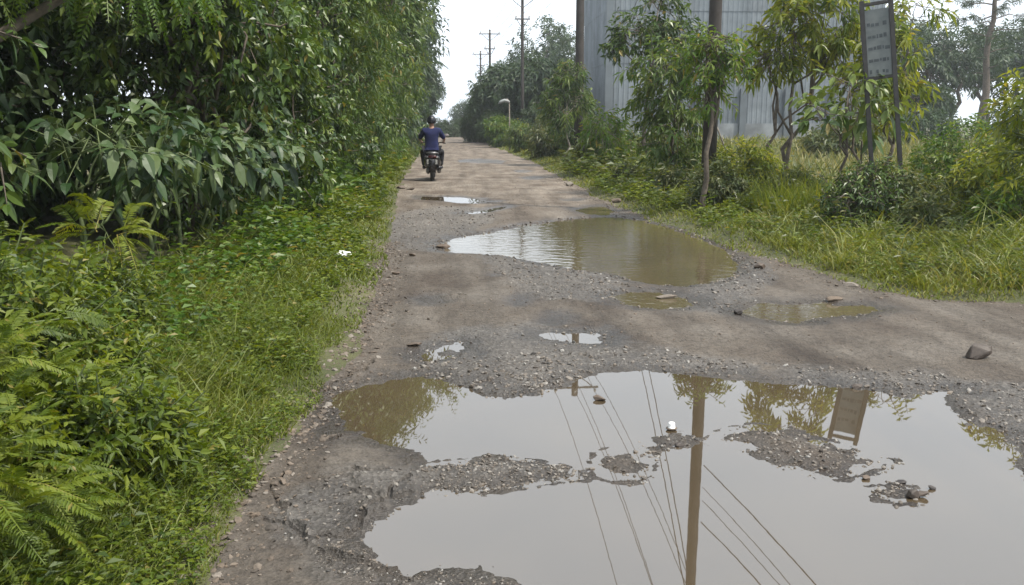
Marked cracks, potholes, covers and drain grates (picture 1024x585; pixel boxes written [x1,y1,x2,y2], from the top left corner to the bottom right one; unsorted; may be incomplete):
pothole [431,215,747,287]
pothole [524,328,614,346]
pothole [602,287,705,310]
pothole [724,299,893,324]
pothole [416,195,485,204]
pothole [406,338,479,363]
pothole [309,365,1024,585]
